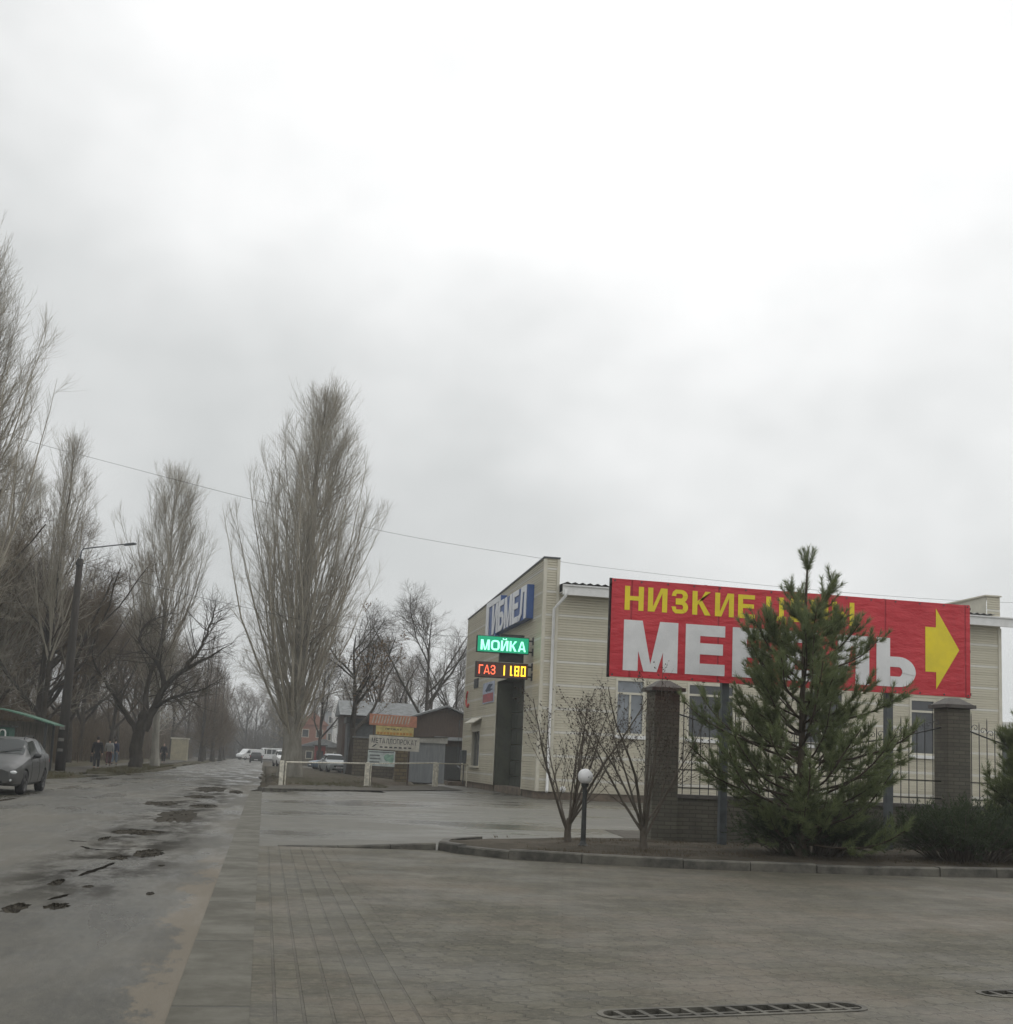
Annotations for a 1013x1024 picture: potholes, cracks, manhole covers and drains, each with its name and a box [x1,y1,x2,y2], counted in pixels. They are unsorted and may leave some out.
drain grate [597,1001,868,1020]
drain grate [975,989,1013,998]
pothole [133,849,165,858]
pothole [0,902,32,913]
pothole [154,810,197,823]
